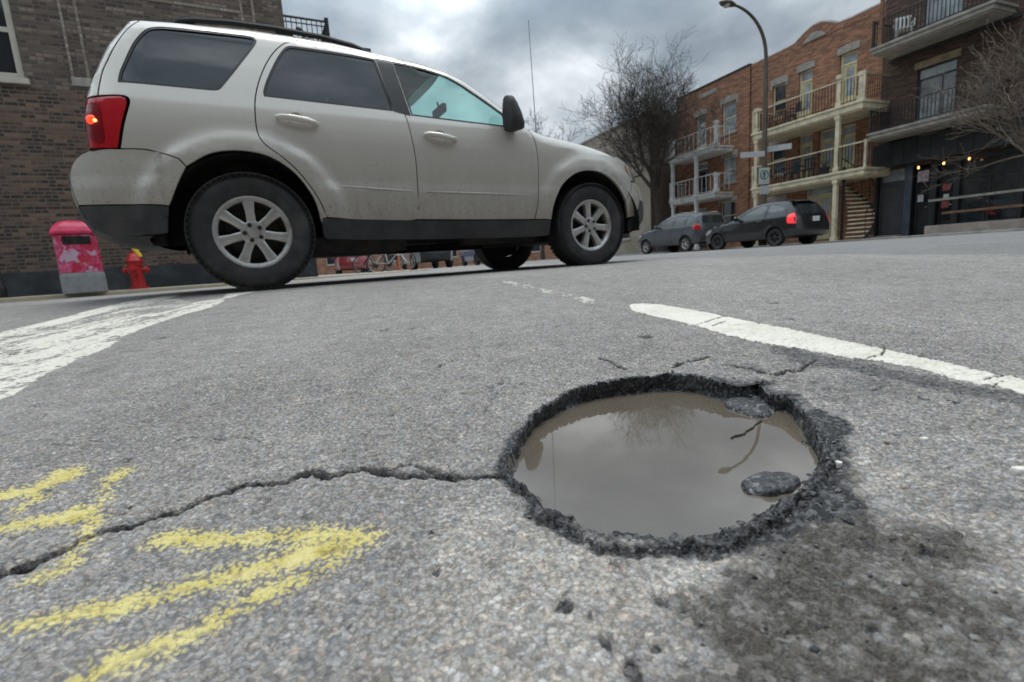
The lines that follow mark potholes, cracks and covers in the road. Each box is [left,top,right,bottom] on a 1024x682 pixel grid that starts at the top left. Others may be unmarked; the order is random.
crack [670,355,818,377]
pothole [493,370,849,561]
crack [0,435,501,579]
crack [597,357,630,371]
